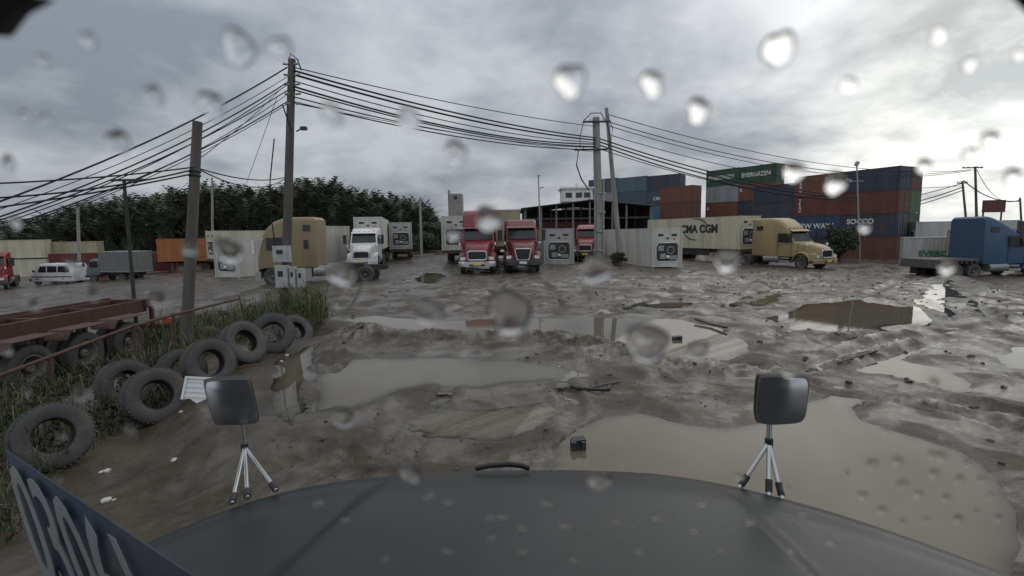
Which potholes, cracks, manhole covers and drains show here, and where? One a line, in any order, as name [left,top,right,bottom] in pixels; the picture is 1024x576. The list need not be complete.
pothole [749,295,932,339]
pothole [402,271,453,285]
pothole [283,349,619,423]
pothole [324,311,779,364]
pothole [512,383,1024,576]
